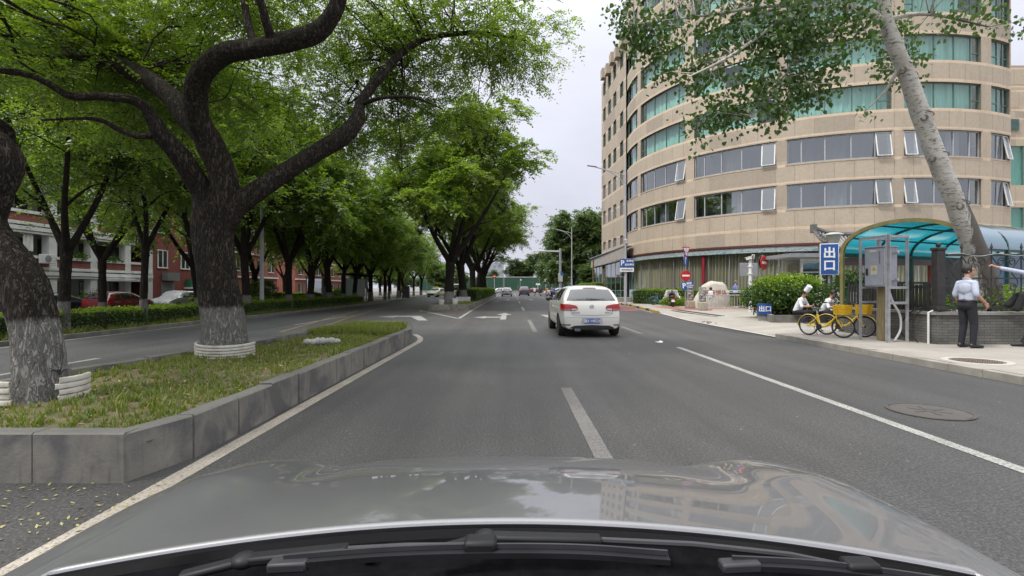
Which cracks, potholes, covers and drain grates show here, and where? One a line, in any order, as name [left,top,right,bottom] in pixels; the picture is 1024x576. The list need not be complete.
manhole cover [885,403,978,421]
manhole cover [940,357,1017,366]
